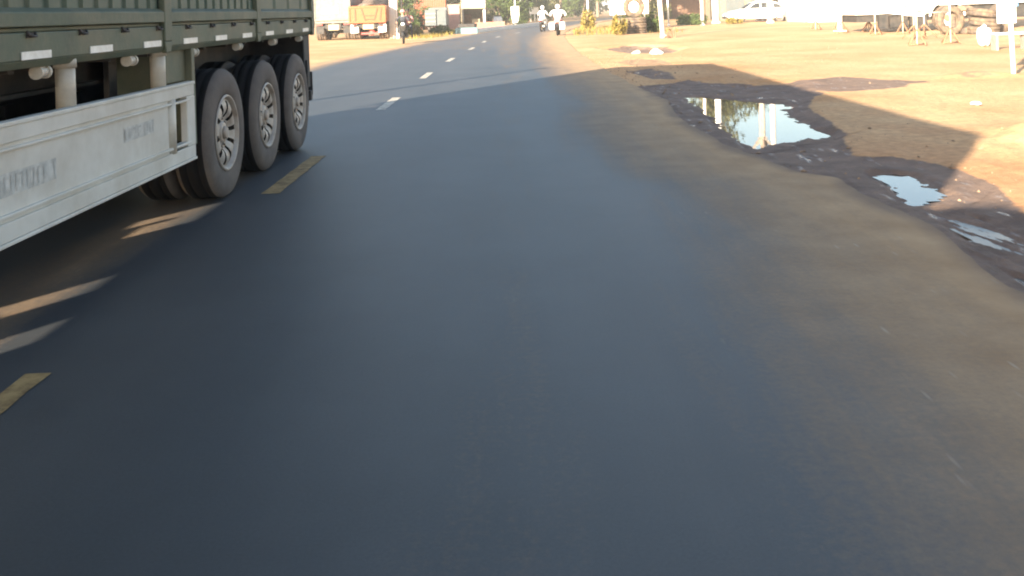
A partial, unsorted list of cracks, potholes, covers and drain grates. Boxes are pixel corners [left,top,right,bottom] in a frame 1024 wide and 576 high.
pothole [837,165,990,210]
pothole [661,93,862,153]
